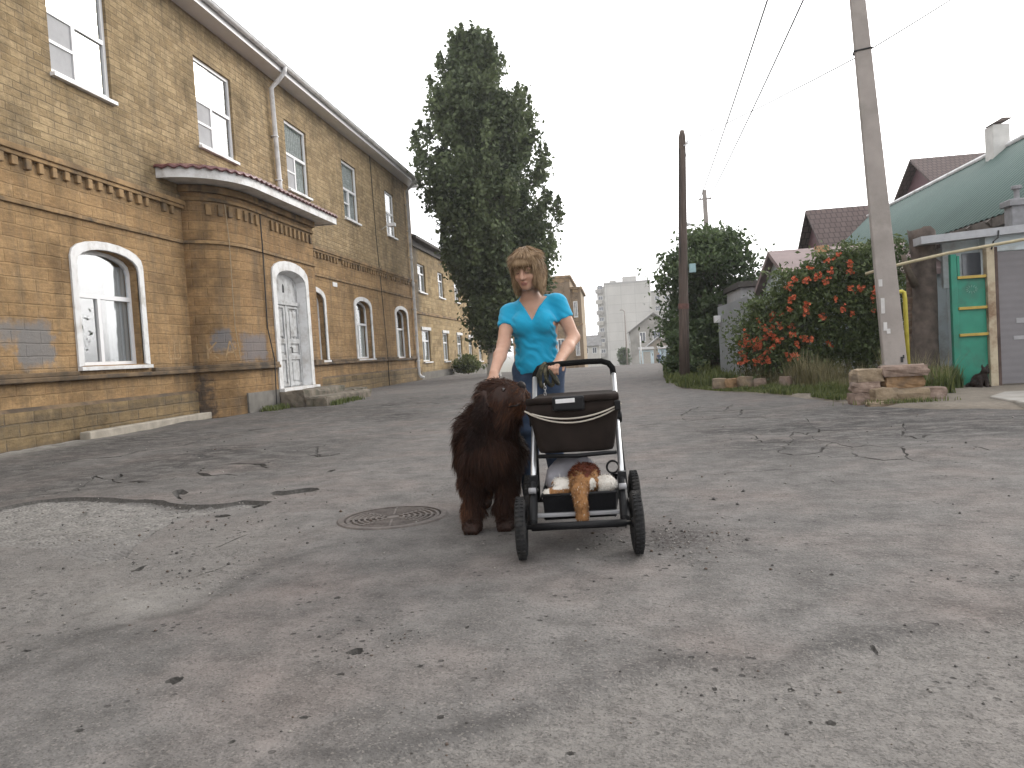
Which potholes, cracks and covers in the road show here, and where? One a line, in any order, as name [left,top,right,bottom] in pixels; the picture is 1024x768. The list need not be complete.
crack [681,402,957,464]
manhole cover [336,505,449,530]
crack [312,436,340,457]
